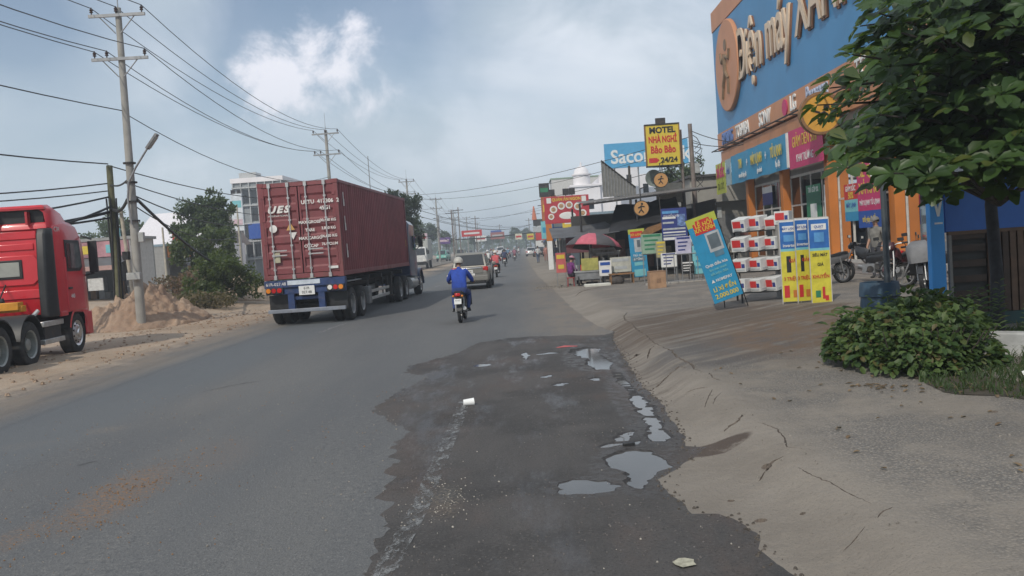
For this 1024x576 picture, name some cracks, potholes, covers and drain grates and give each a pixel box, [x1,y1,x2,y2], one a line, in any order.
pothole [611,371,675,442]
pothole [557,479,623,495]
pothole [601,448,675,489]
pothole [568,347,615,370]
